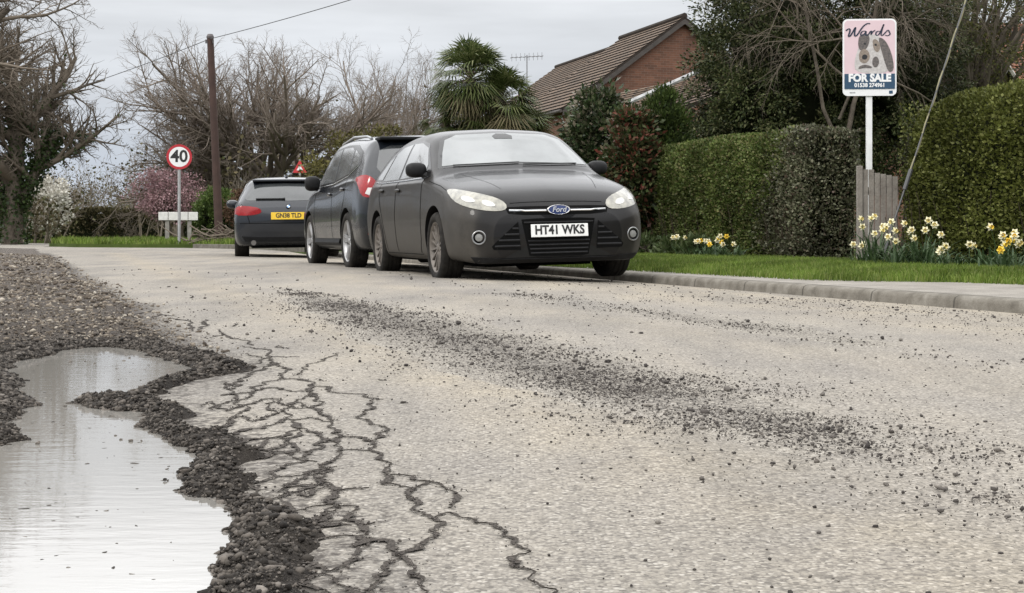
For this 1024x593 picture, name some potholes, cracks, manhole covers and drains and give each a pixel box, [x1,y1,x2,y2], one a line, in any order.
pothole [0,334,325,593]
crack [134,309,562,593]
